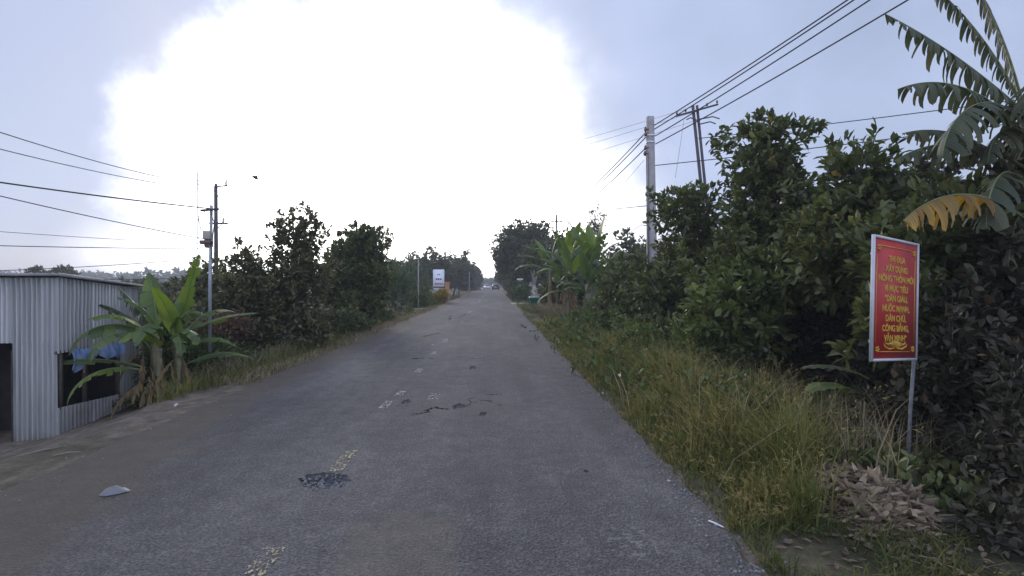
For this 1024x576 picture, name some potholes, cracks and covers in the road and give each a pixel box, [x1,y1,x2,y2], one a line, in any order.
pothole [298,472,352,490]
crack [412,394,502,415]
